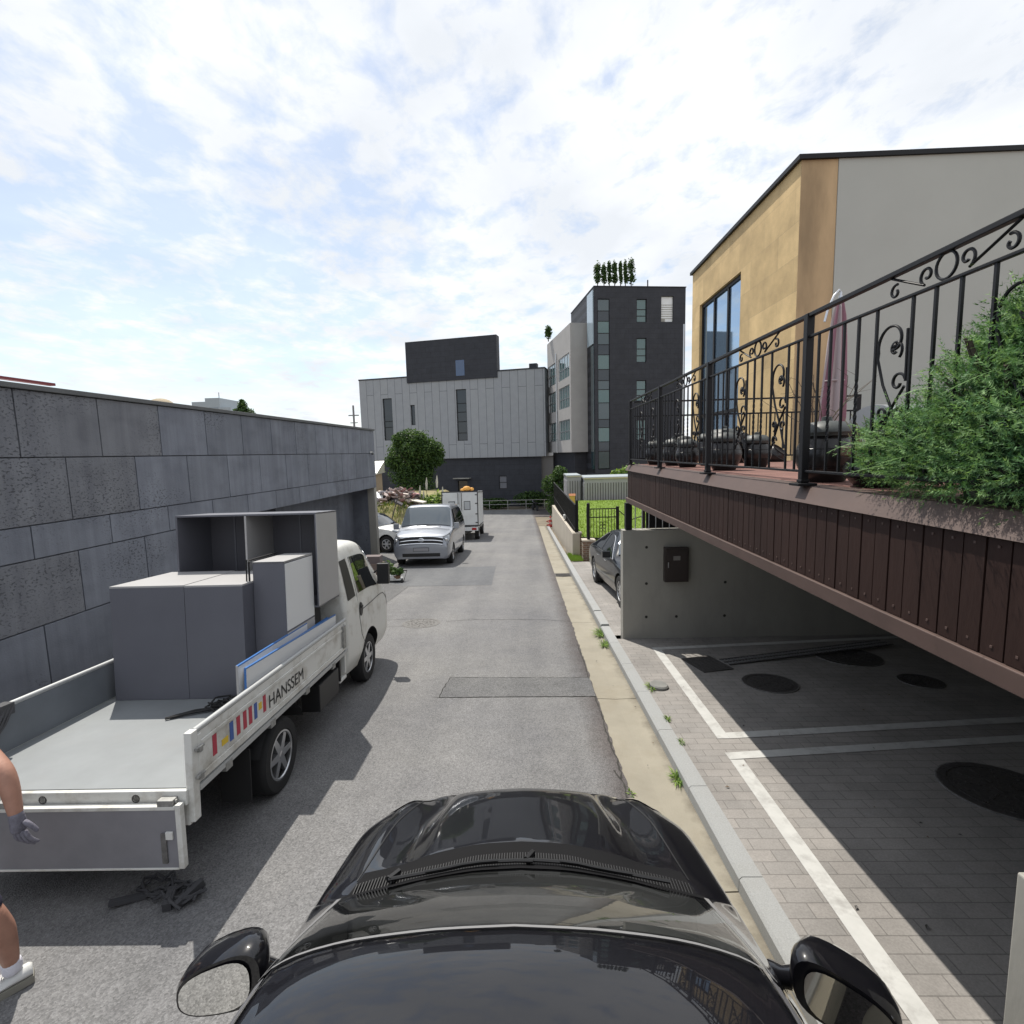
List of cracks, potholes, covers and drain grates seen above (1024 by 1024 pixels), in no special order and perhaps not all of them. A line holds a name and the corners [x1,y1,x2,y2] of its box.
manhole cover [741,673,799,694]
manhole cover [896,673,946,689]
manhole cover [402,618,440,628]
manhole cover [814,648,884,667]
utility cover [650,680,669,691]
manhole cover [934,761,1024,822]
